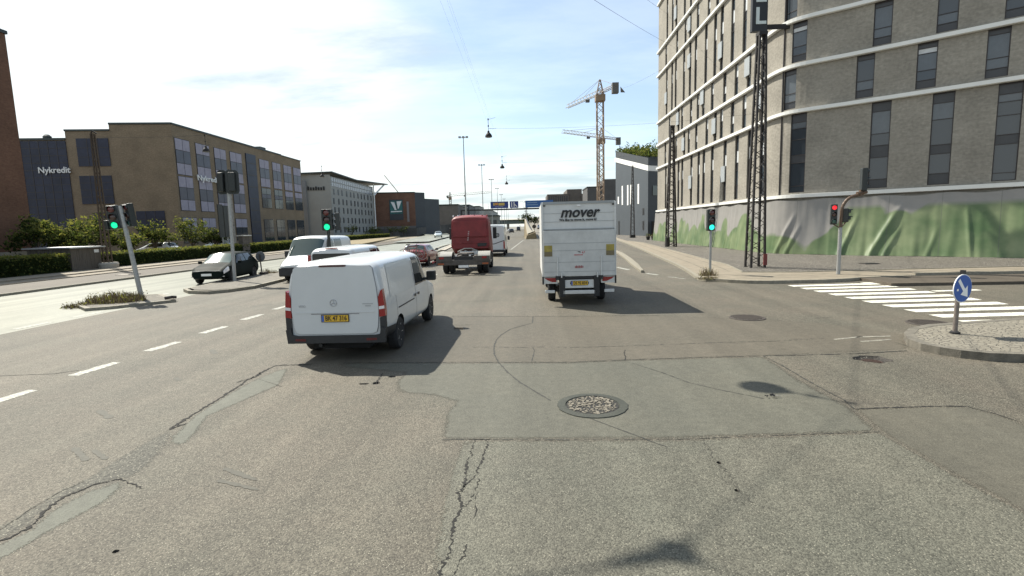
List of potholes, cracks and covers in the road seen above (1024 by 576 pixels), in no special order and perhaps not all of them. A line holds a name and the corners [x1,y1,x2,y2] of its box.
manhole cover [557,393,628,419]
crack [437,439,489,576]
crack [0,478,141,541]
crack [169,364,311,430]
crack [704,442,754,503]
